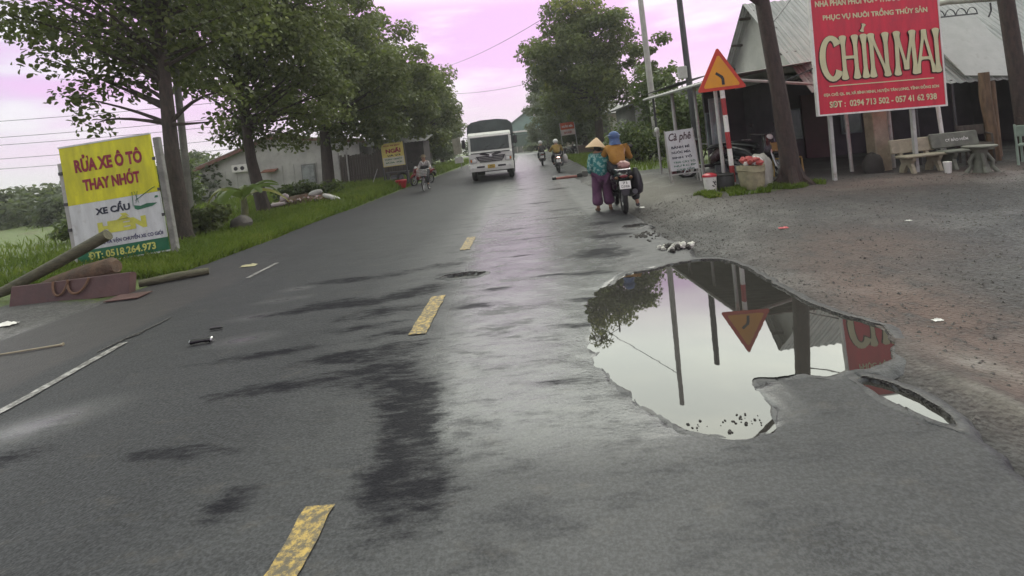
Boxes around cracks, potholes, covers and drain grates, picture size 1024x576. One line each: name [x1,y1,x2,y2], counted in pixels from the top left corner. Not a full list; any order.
pothole [583,257,906,440]
pothole [435,271,491,281]
pothole [846,371,983,442]
crack [97,317,172,352]
